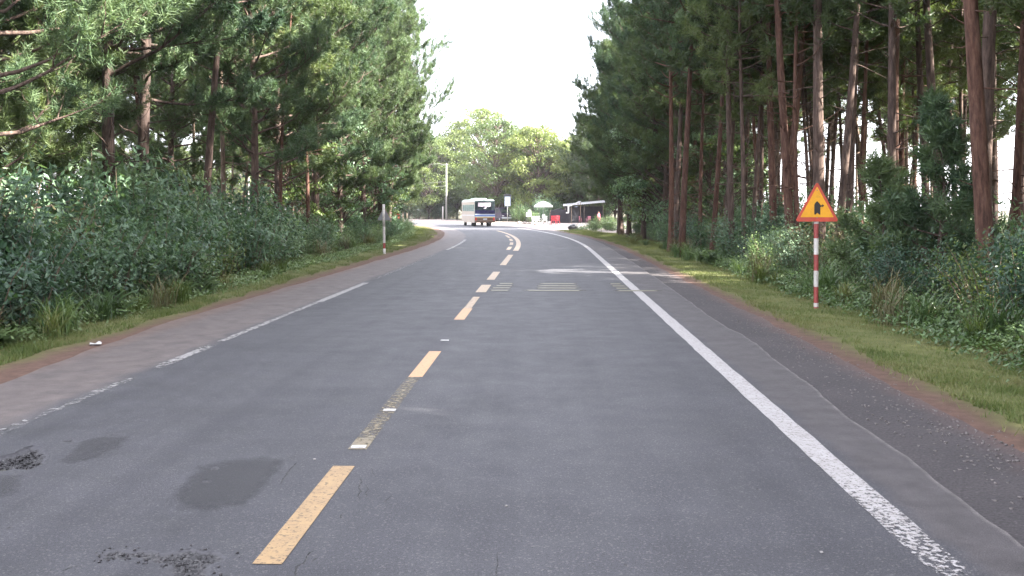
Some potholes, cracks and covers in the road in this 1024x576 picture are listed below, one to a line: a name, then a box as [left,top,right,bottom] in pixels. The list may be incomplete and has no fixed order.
pothole [0,445,50,472]
crack [340,468,392,519]
pothole [95,548,226,576]
crack [294,550,317,576]
